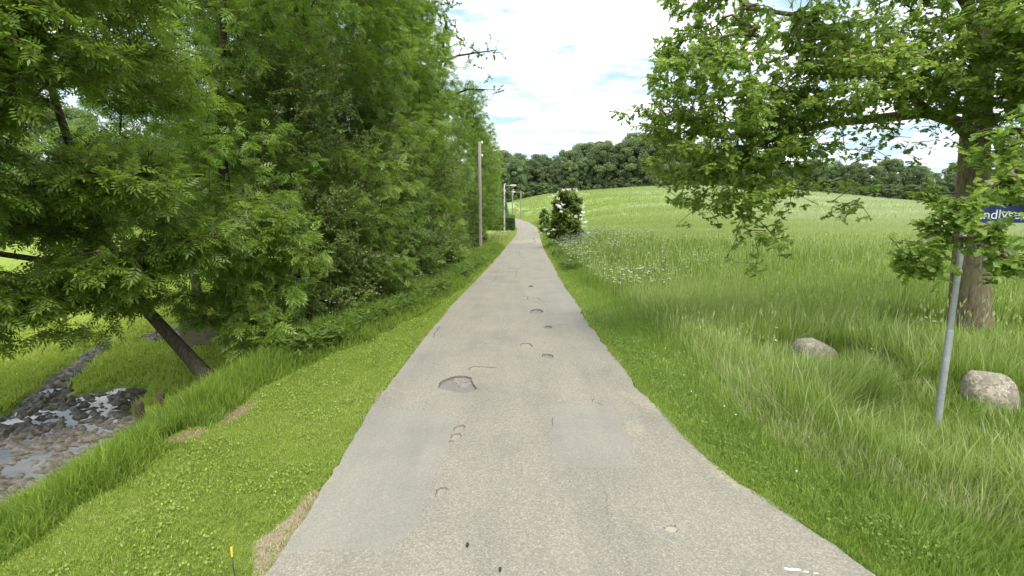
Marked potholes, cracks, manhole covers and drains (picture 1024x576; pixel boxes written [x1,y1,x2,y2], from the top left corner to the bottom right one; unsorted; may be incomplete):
pothole [438,375,477,394]
